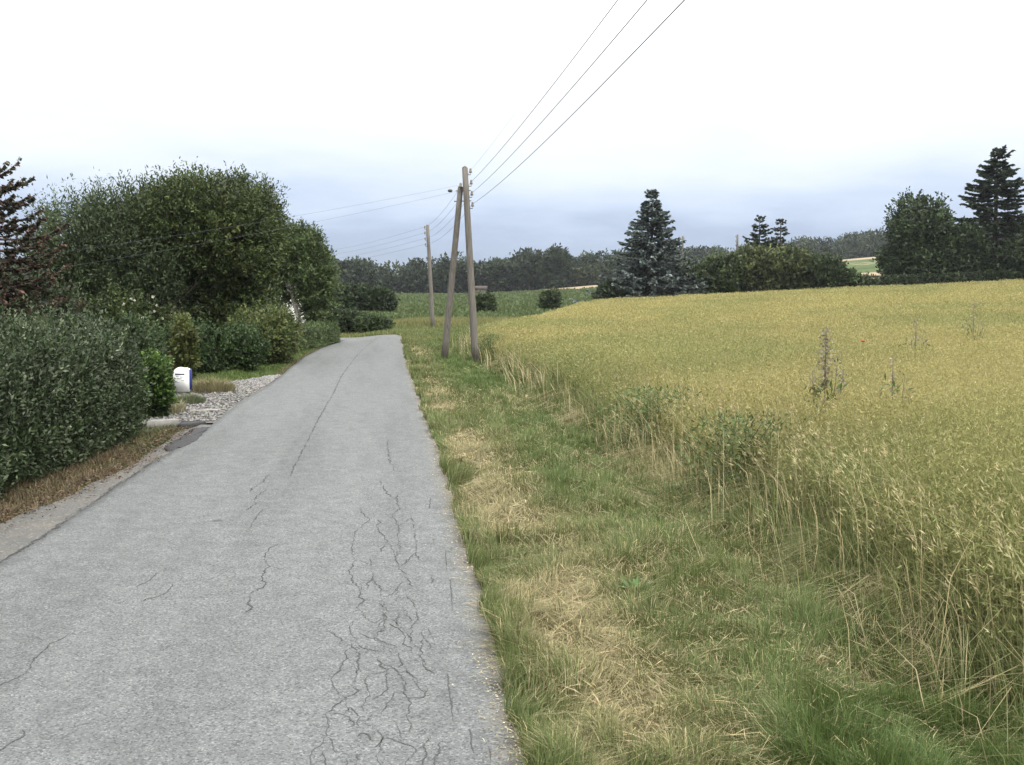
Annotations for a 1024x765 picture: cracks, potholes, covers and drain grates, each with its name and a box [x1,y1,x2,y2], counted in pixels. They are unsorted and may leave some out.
crack [246,543,279,612]
crack [447,674,491,759]
